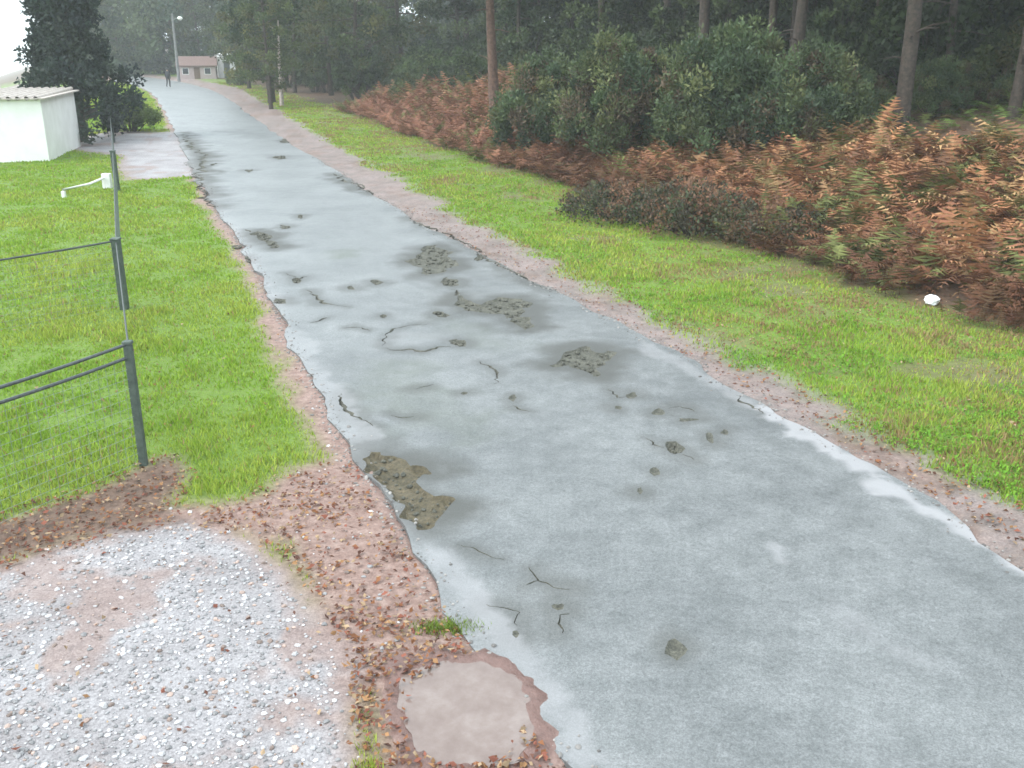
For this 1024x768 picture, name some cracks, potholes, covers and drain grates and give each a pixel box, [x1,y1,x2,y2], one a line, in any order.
pothole [250,231,279,248]
pothole [405,245,459,275]
crack [347,324,448,352]
pothole [665,441,685,454]
pothole [363,452,455,530]
crack [526,568,568,590]
pothole [454,295,534,330]
pothole [549,346,617,377]
crack [338,394,373,426]
pothole [664,638,688,661]
